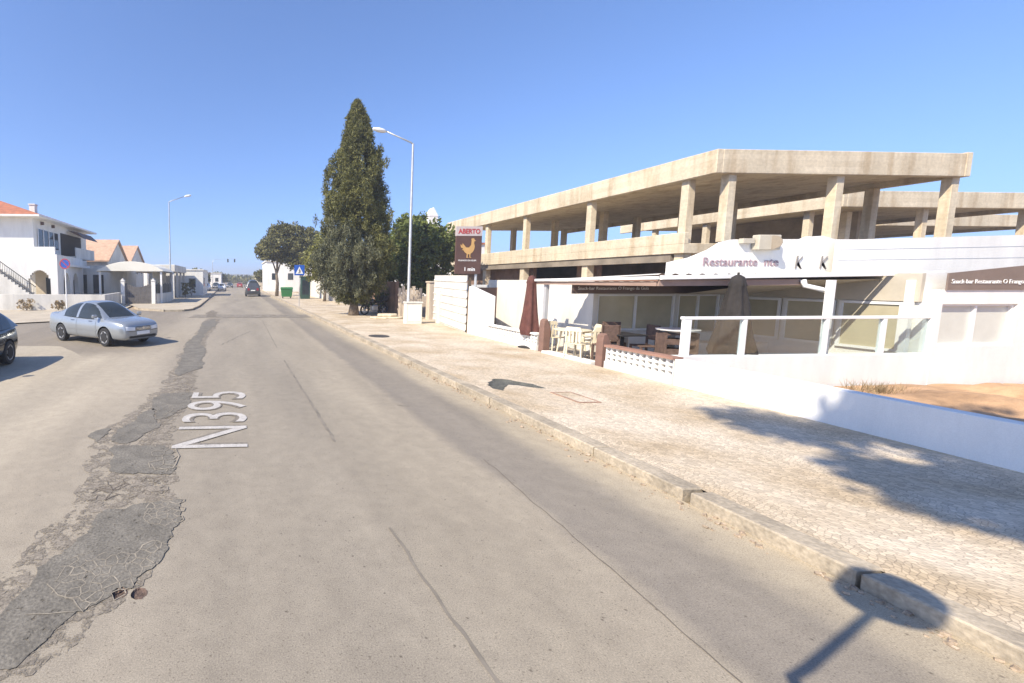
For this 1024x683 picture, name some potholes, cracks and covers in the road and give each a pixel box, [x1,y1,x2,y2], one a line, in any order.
crack [24,499,186,615]
manhole cover [550,392,602,403]
